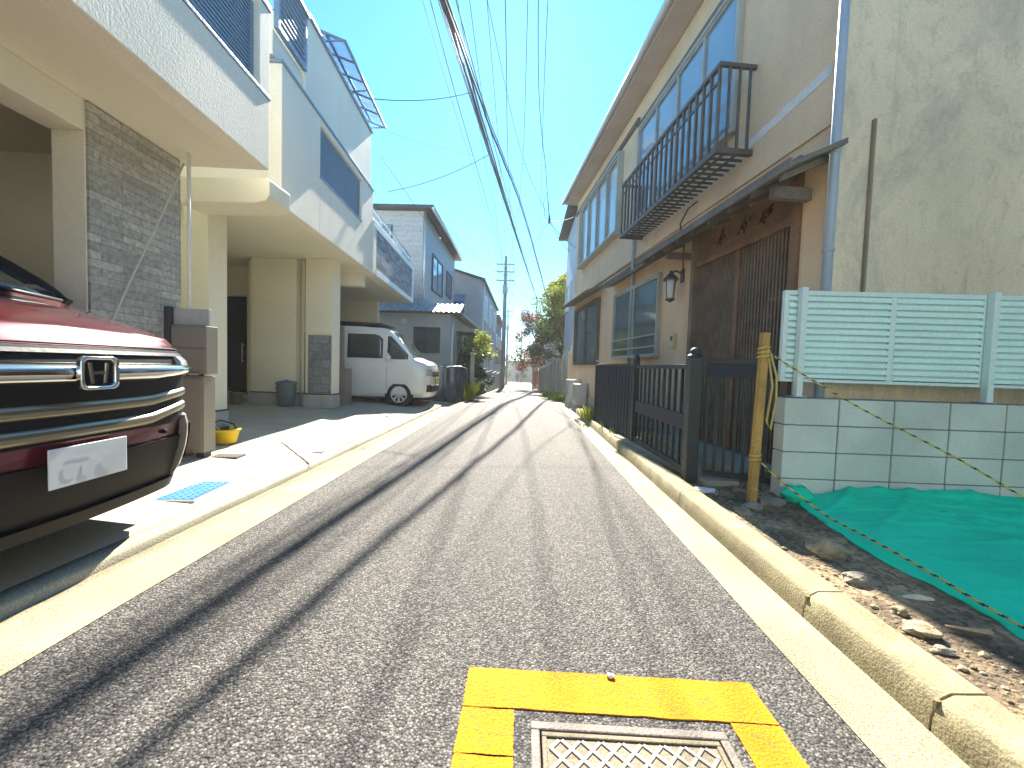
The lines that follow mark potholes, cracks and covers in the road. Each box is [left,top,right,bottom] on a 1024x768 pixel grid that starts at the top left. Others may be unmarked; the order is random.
manhole cover [531,721,744,768]
